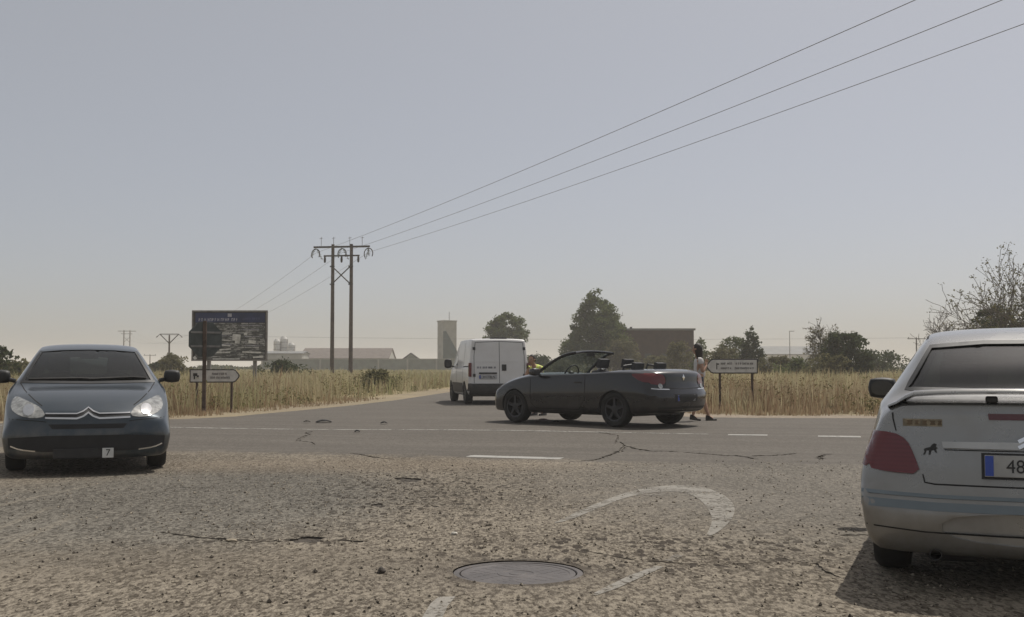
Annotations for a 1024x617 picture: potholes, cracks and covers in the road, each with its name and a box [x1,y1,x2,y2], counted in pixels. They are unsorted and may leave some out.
crack [571,432,676,462]
crack [160,532,363,542]
manhole cover [453,562,584,584]
